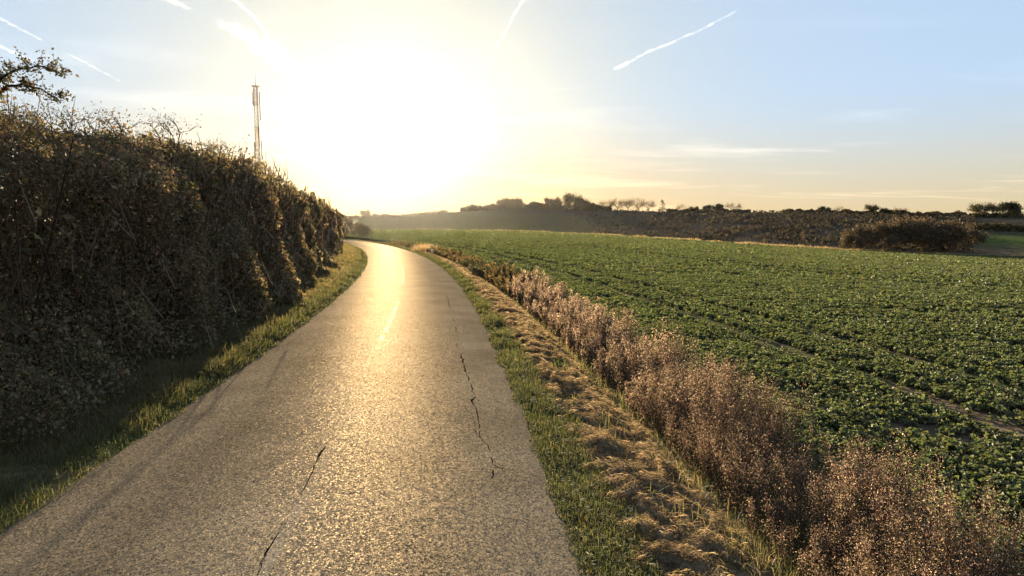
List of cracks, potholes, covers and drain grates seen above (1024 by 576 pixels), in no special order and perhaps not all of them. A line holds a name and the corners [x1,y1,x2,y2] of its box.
crack [256,446,326,576]
crack [448,301,513,479]
